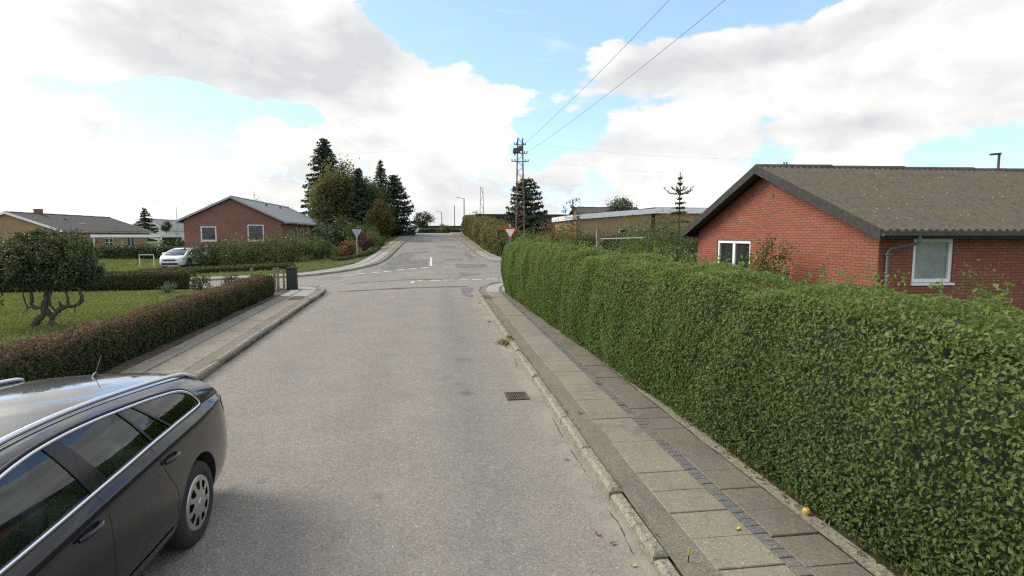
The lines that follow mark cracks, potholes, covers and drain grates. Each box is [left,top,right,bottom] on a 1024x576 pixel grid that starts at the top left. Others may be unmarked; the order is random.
drain grate [504,391,529,401]
crack [552,418,645,574]
